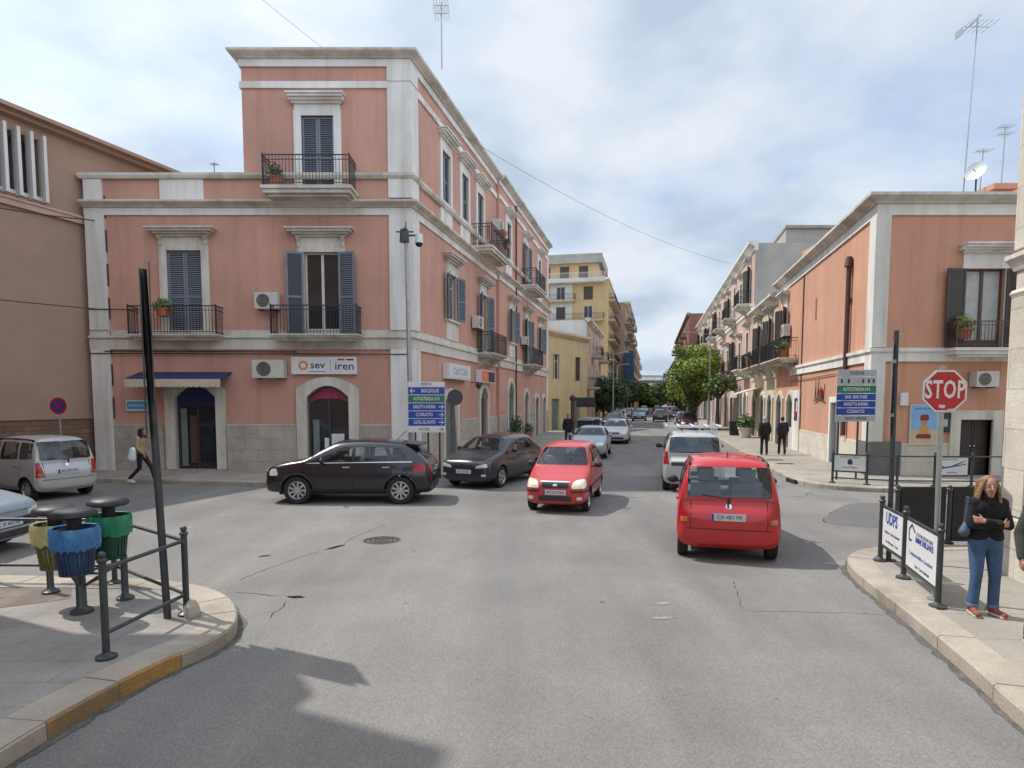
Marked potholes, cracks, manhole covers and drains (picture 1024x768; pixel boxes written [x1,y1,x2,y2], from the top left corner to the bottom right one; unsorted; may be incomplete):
manhole cover [362,536,401,545]
